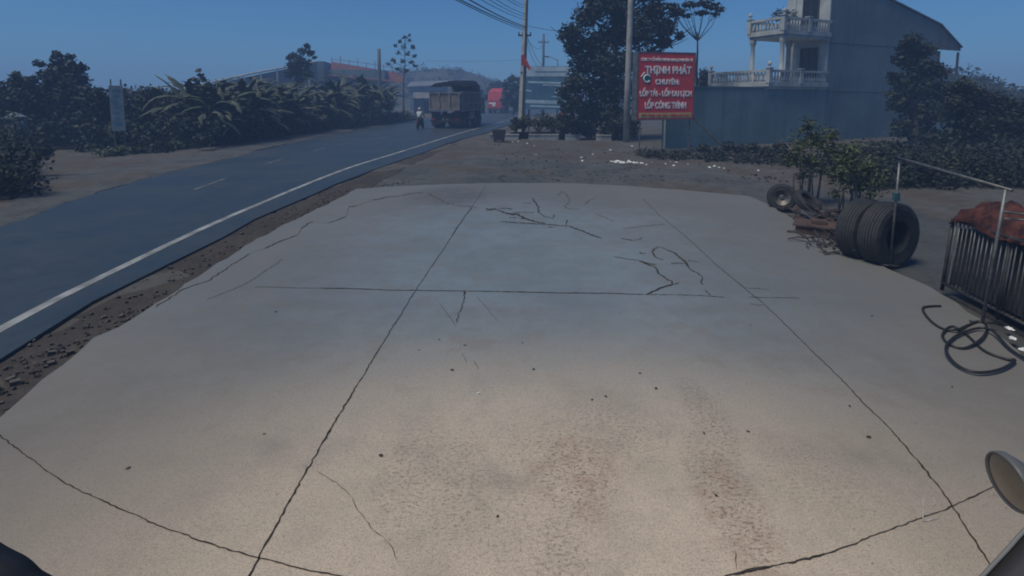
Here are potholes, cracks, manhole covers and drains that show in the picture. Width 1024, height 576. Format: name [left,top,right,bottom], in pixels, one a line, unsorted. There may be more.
crack [619,224,710,295]
crack [439,291,498,324]
crack [156,191,612,307]
